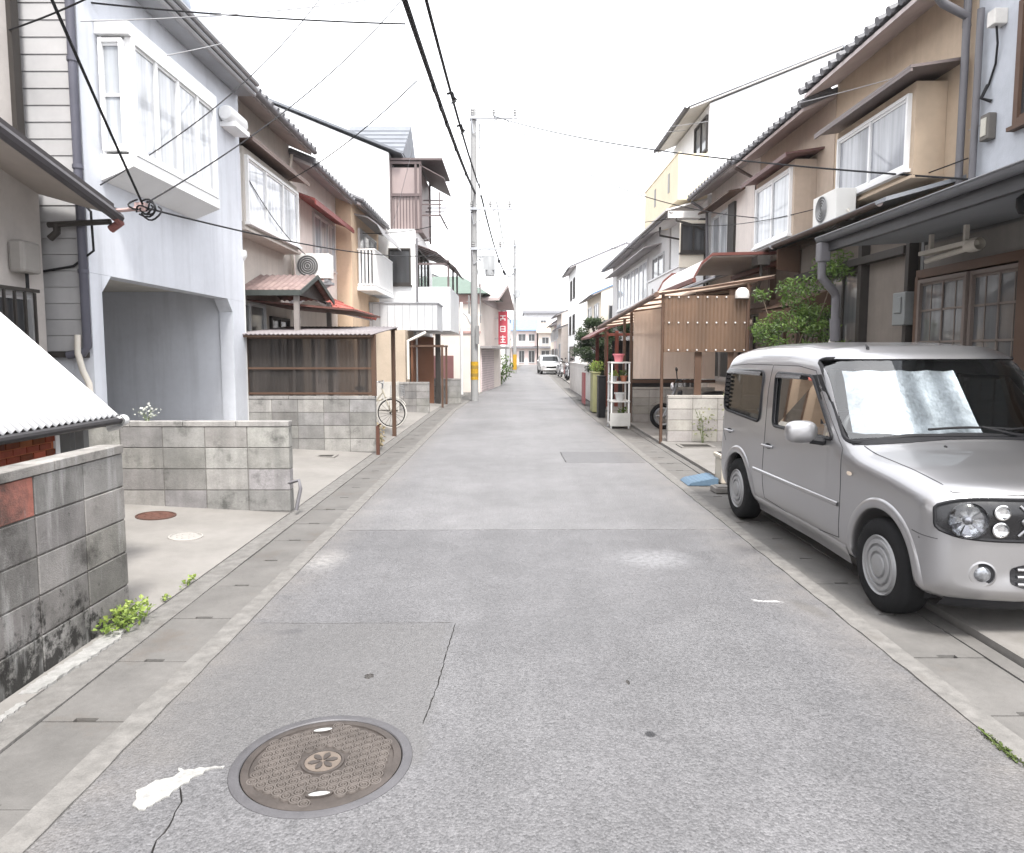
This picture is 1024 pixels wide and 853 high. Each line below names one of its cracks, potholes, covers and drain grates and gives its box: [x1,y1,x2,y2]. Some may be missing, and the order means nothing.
manhole cover [168,532,203,541]
crack [295,622,455,723]
crack [151,787,183,853]
manhole cover [228,715,412,819]
manhole cover [135,511,177,520]
